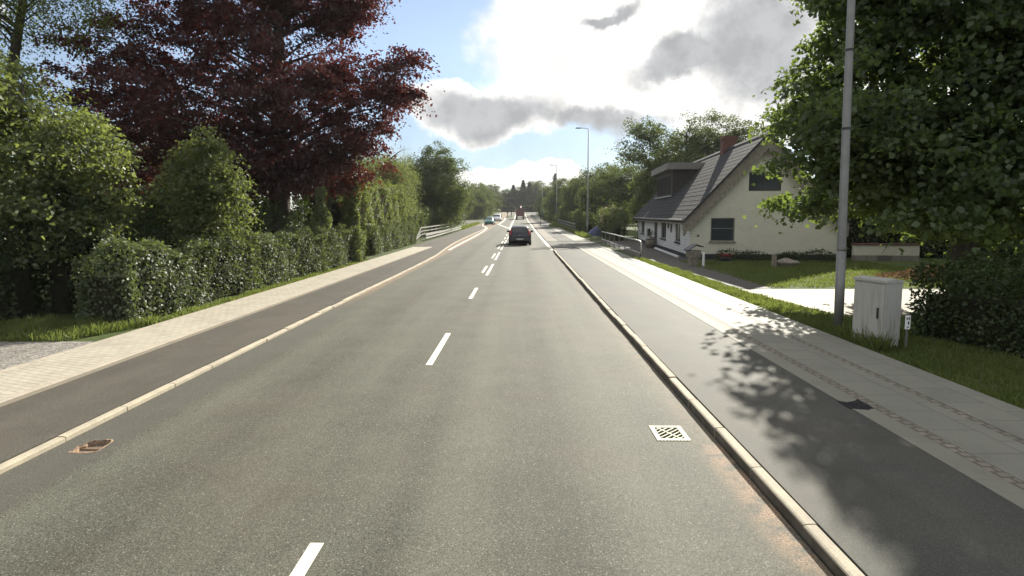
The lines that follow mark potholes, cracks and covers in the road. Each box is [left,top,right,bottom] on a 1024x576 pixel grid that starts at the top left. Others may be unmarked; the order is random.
drain grate [649,425,691,441]
